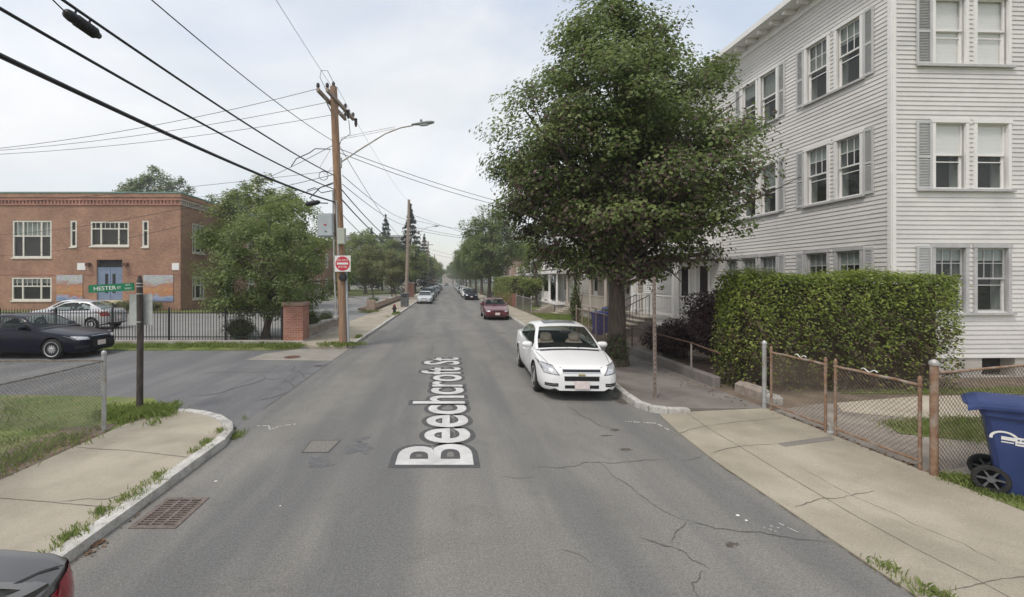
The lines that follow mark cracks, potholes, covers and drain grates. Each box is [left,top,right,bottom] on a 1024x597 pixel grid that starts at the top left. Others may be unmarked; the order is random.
crack [505,459,685,520]
crack [198,363,329,396]
drain grate [128,497,209,529]
manhole cover [302,440,340,452]
crack [639,522,828,596]
